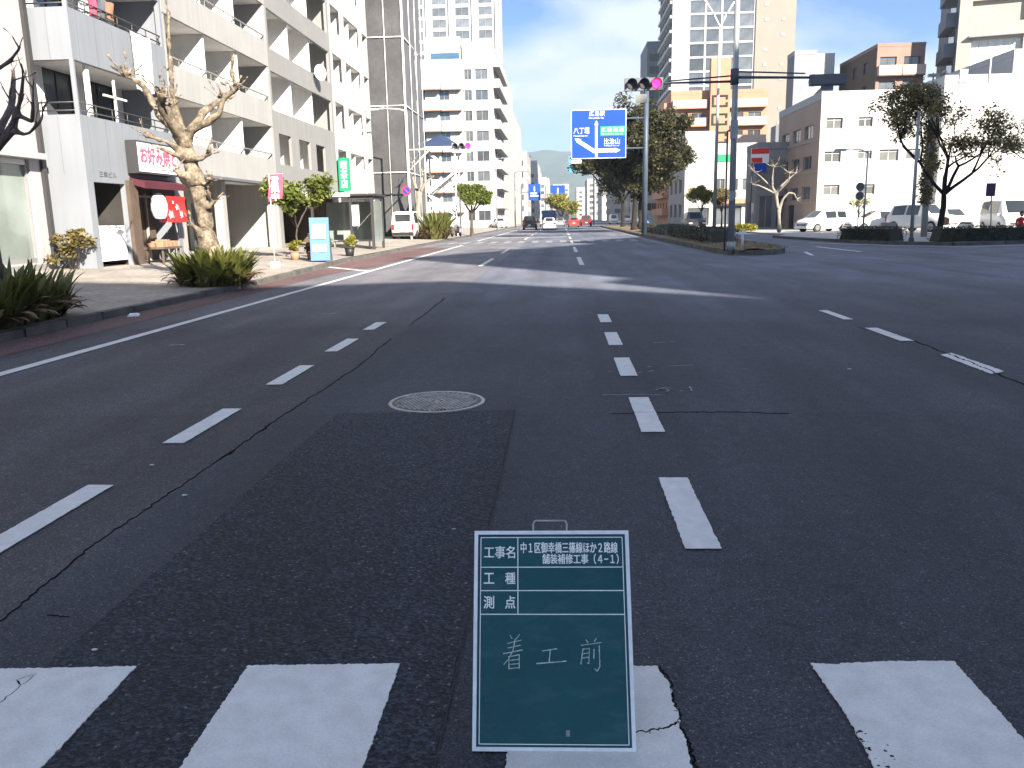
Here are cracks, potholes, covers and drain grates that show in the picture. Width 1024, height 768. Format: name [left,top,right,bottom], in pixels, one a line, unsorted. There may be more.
crack [0,338,392,622]
crack [858,327,1024,385]
crack [649,665,698,768]
manhole cover [389,391,485,413]
